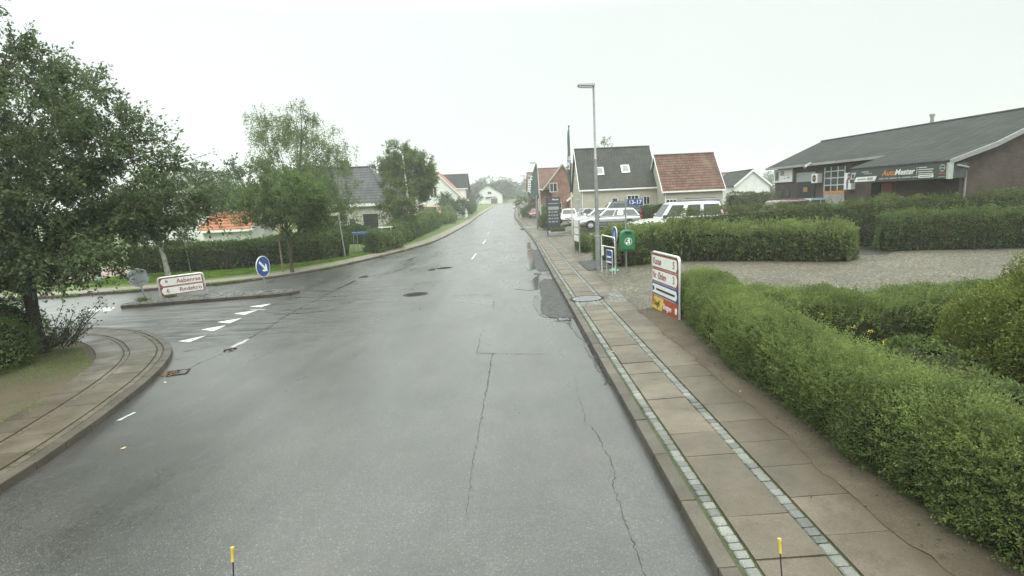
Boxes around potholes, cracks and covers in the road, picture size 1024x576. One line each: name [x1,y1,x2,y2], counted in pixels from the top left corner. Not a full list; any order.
crack [573,373,646,576]
crack [466,354,493,513]
